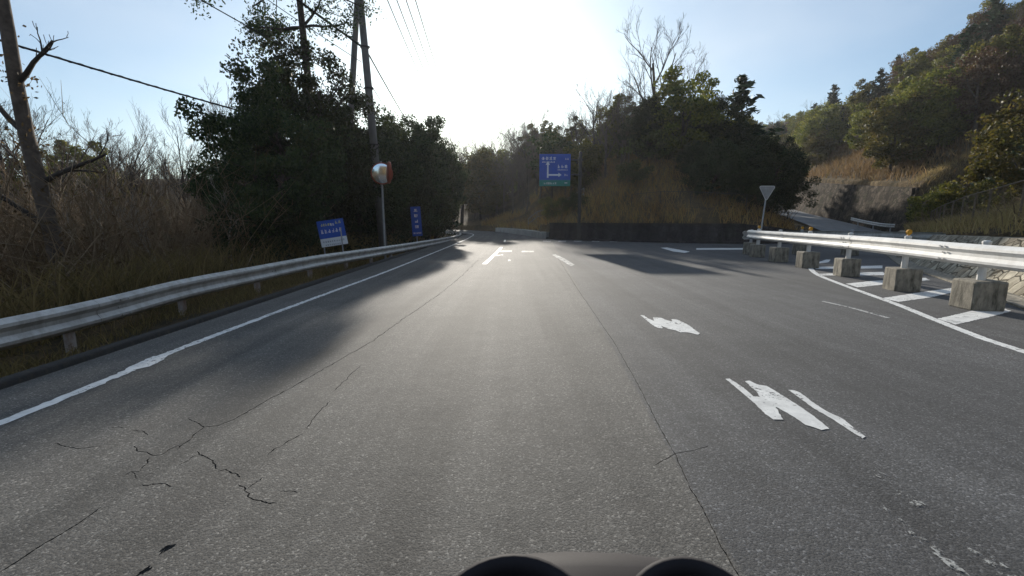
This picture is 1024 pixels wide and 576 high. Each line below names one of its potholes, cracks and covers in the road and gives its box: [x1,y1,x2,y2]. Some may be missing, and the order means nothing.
crack [1,506,102,572]
crack [111,279,458,504]
